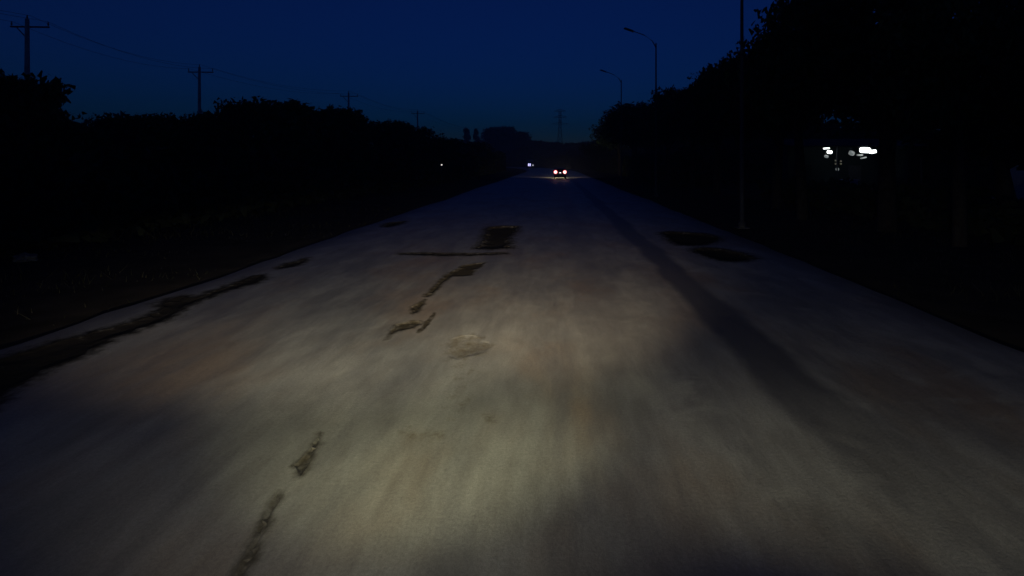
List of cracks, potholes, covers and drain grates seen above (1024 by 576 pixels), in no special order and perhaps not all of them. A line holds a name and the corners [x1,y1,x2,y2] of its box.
pothole [664,232,717,245]
pothole [476,226,517,249]
pothole [694,248,754,261]
